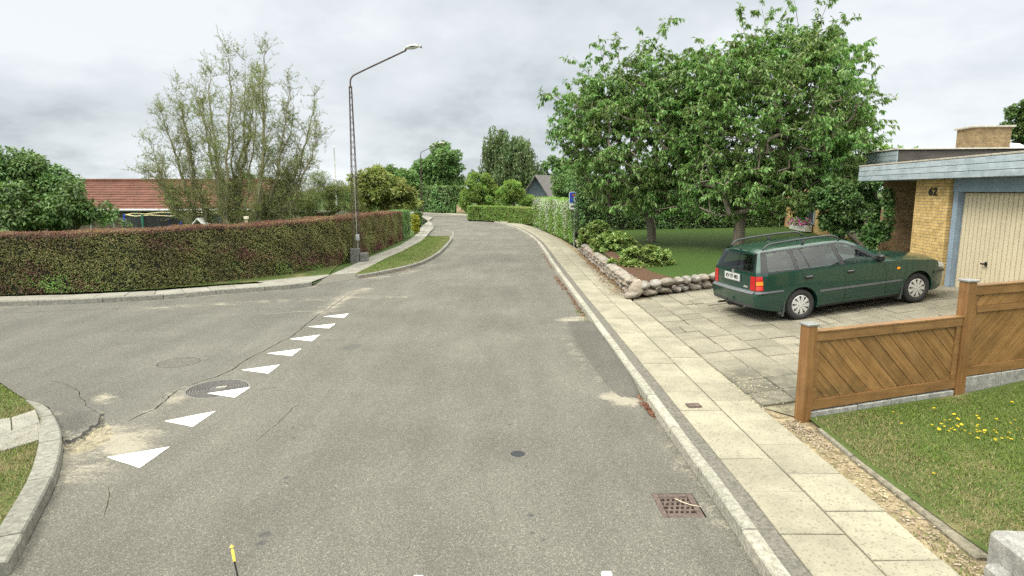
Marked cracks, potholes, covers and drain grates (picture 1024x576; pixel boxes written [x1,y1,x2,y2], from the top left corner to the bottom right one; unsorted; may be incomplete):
manhole cover [155,357,202,369]
pothole [63,412,114,455]
manhole cover [183,379,250,398]
drain grate [652,494,705,518]
